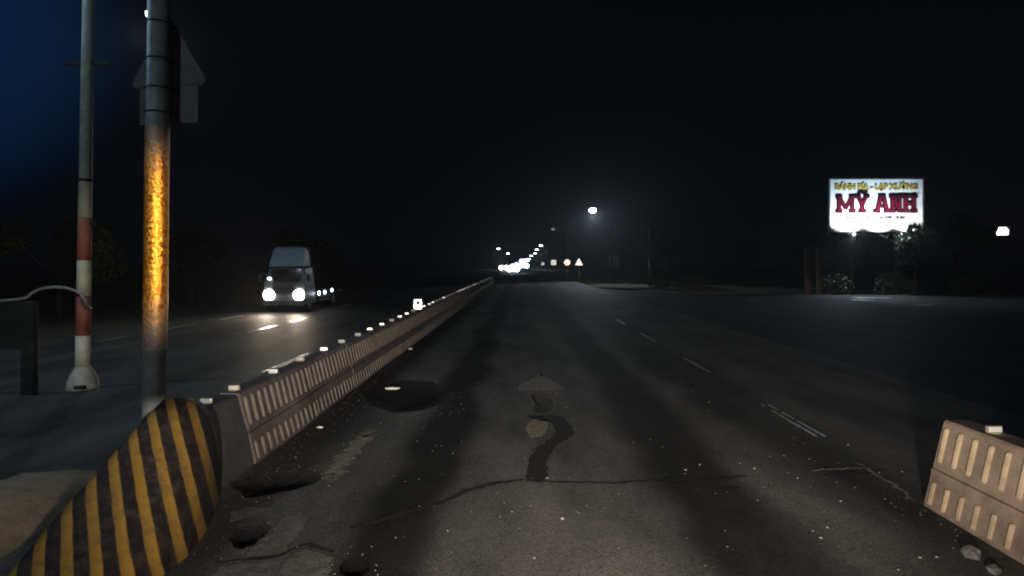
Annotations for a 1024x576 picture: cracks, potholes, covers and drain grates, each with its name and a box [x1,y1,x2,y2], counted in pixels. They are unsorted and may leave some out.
pothole [339,558,371,576]
pothole [227,518,272,549]
pothole [362,380,454,413]
pothole [229,469,322,498]
crack [214,448,746,563]
